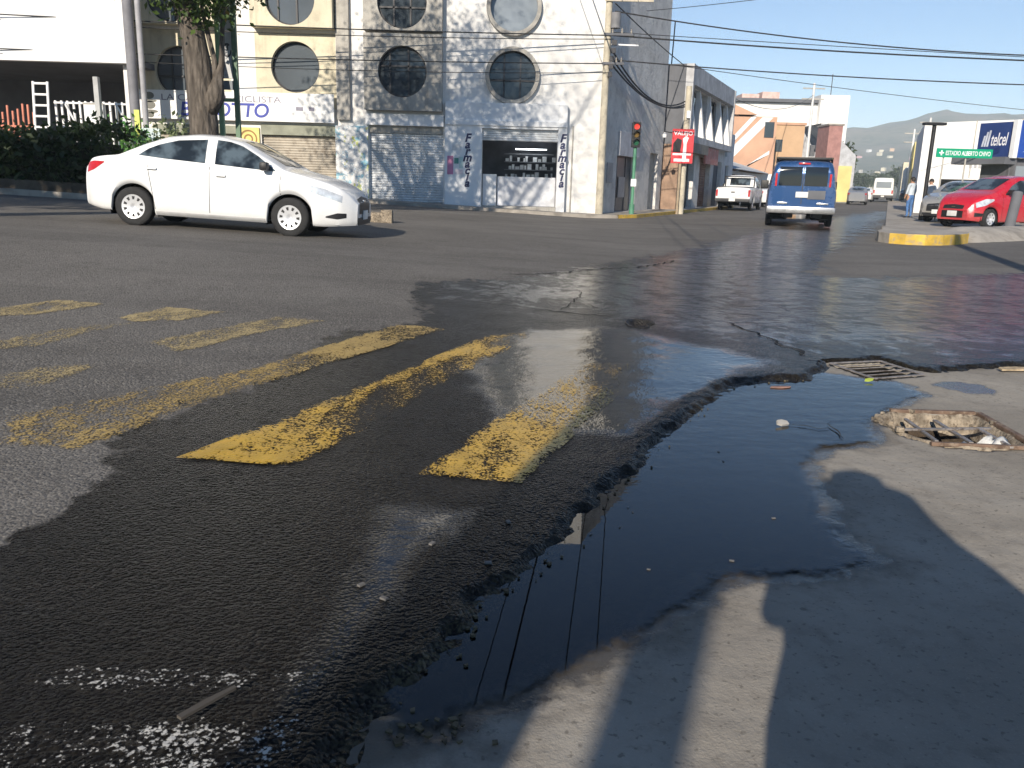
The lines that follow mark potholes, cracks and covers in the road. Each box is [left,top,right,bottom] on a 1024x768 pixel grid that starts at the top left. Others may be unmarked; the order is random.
crack [538,291,604,316]
drain grate [829,360,925,381]
drain grate [871,408,1024,451]
crack [729,322,834,356]
